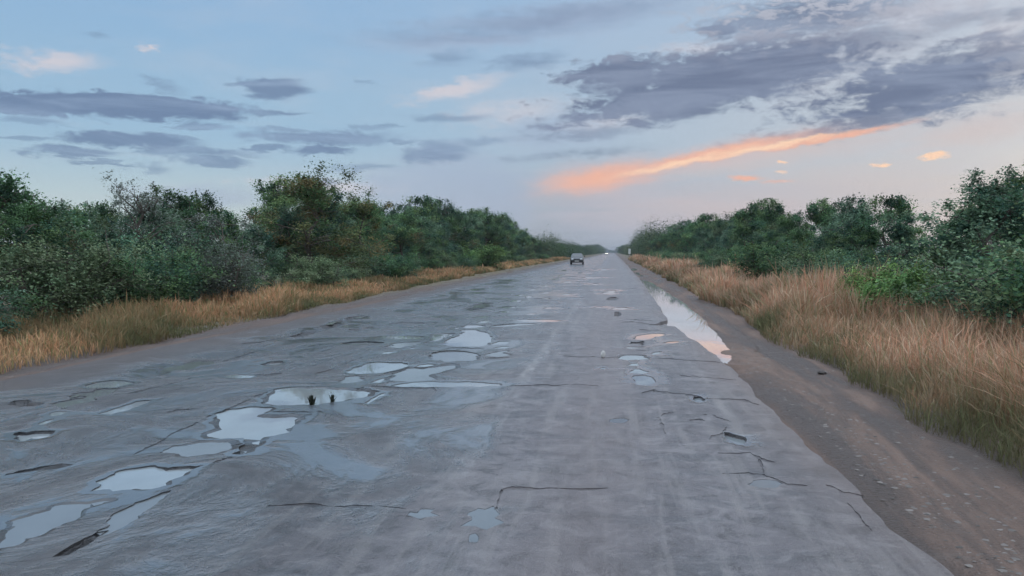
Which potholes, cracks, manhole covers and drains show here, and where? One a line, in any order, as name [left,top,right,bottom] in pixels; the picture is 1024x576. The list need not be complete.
pothole [13,430,55,441]
pothole [91,465,203,491]
pothole [428,350,481,362]
pothole [631,375,656,385]
pothole [53,530,109,557]
crack [494,486,606,509]
pothole [160,439,243,458]
pothole [346,362,408,374]
crack [826,485,872,531]
pothole [461,506,504,530]
pothole [439,330,493,347]
pothole [0,498,119,550]
